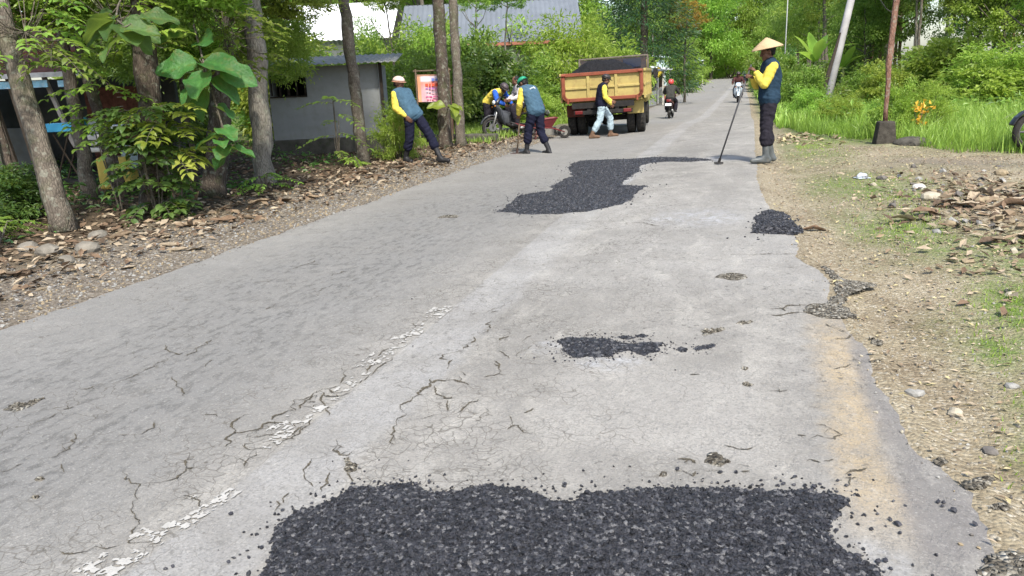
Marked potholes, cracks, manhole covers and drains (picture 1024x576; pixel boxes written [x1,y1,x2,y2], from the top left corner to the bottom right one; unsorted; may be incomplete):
pothole [3,397,45,412]
crack [205,313,437,465]
crack [389,311,532,445]
crack [678,444,755,476]
pothole [704,452,731,467]
crack [275,438,352,510]
crack [39,340,213,421]
crack [56,455,201,554]
